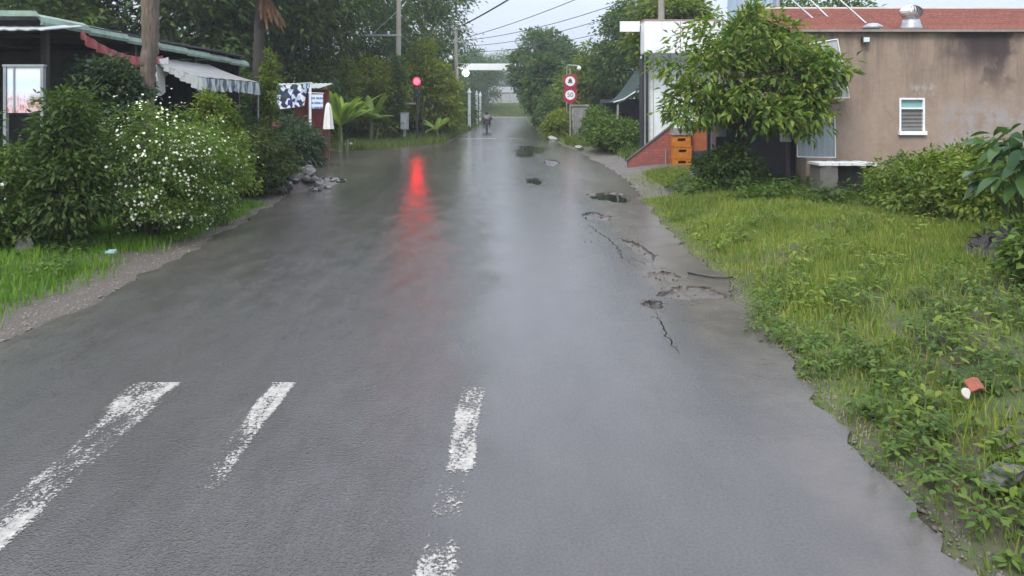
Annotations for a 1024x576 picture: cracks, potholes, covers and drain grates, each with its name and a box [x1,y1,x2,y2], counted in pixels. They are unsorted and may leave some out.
pothole [640,300,664,309]
pothole [647,270,681,283]
crack [587,223,646,266]
pothole [586,192,631,203]
pothole [656,286,727,301]
crack [656,303,701,353]
